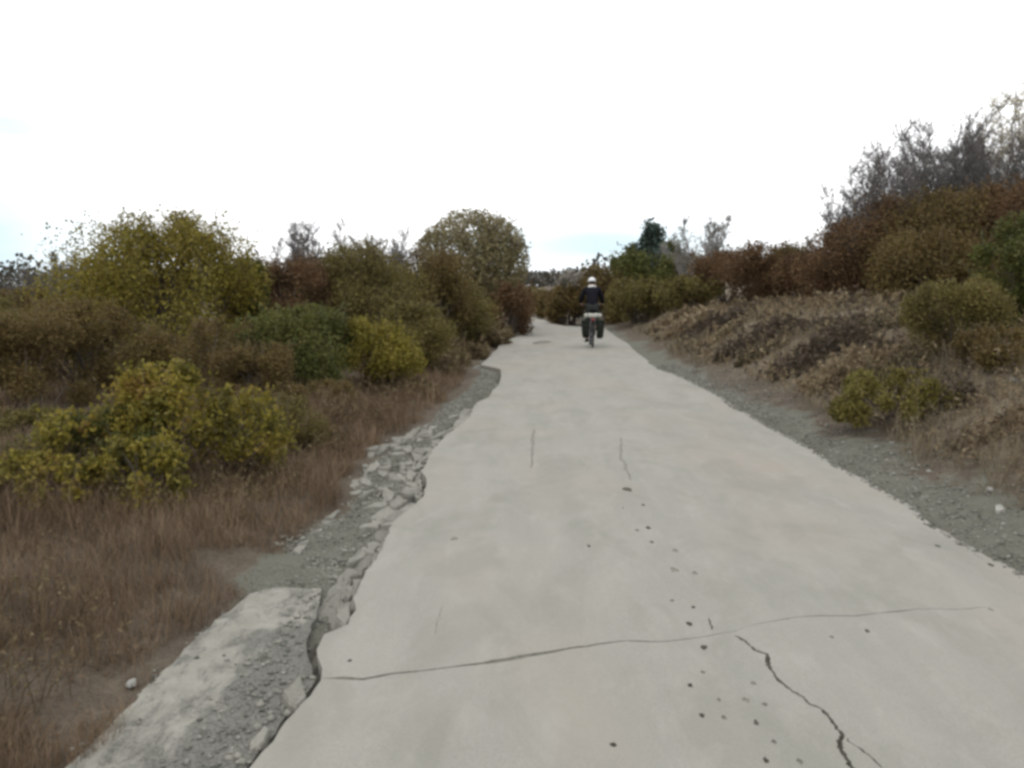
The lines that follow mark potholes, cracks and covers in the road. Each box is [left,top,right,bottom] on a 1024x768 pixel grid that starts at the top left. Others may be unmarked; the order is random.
crack [277,606,982,768]
crack [619,437,631,480]
